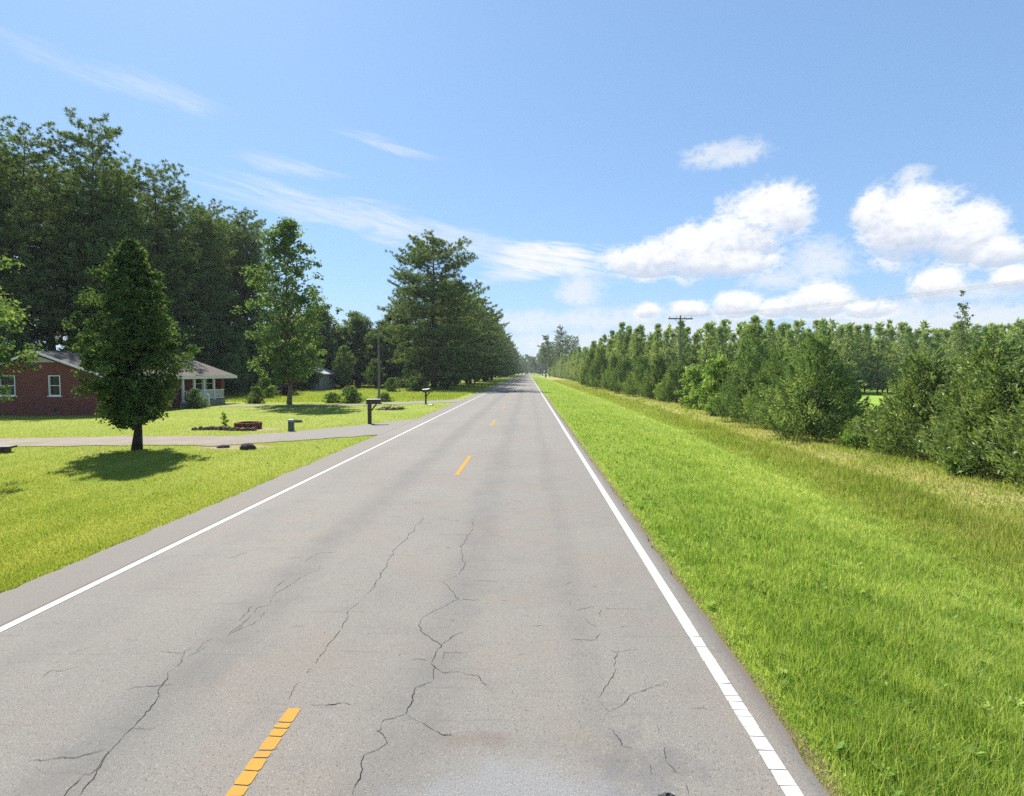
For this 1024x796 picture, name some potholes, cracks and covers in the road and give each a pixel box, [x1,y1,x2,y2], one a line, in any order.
crack [289,520,422,705]
crack [35,565,320,796]
crack [352,516,494,792]
crack [573,606,660,747]
